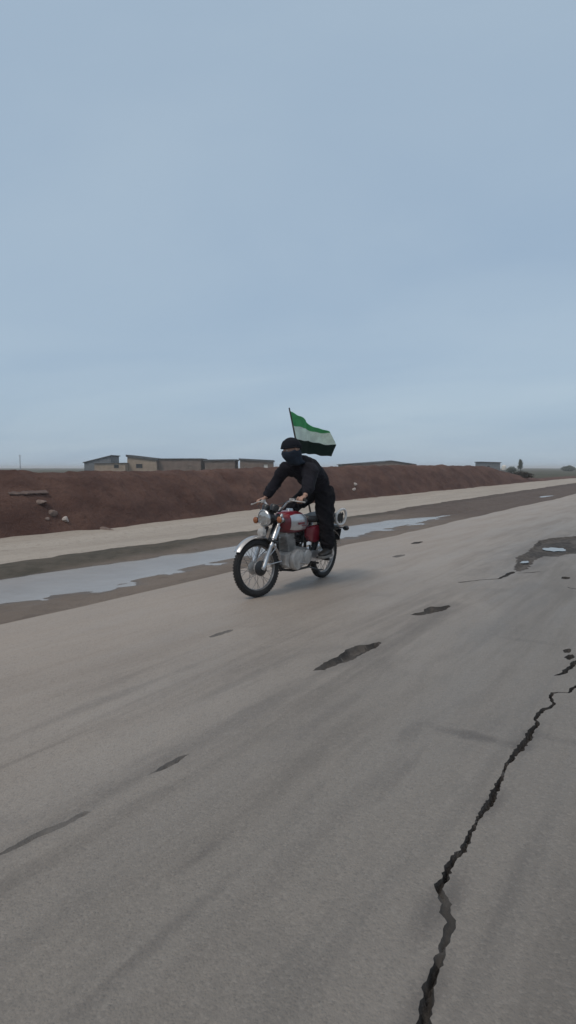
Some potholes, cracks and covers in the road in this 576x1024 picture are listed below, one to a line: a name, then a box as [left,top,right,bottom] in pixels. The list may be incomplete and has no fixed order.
crack [458,572,534,583]
crack [416,660,576,1024]
pothole [514,536,576,571]
pothole [313,642,381,671]
pothole [149,754,189,775]
pothole [411,605,450,615]
